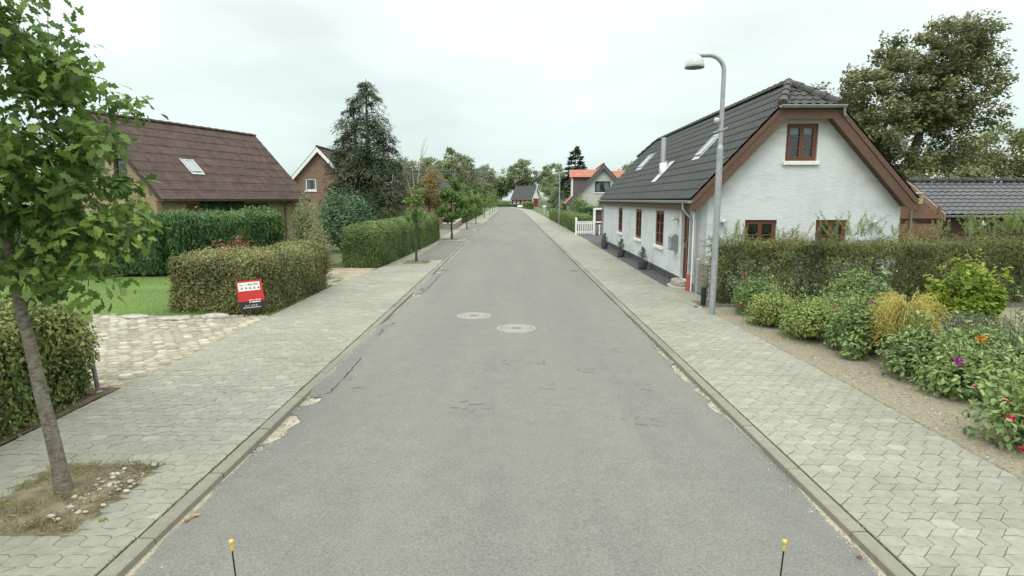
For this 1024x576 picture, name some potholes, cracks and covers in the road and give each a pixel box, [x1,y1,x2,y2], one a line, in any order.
crack [310,358,366,397]
manhole cover [496,324,536,333]
